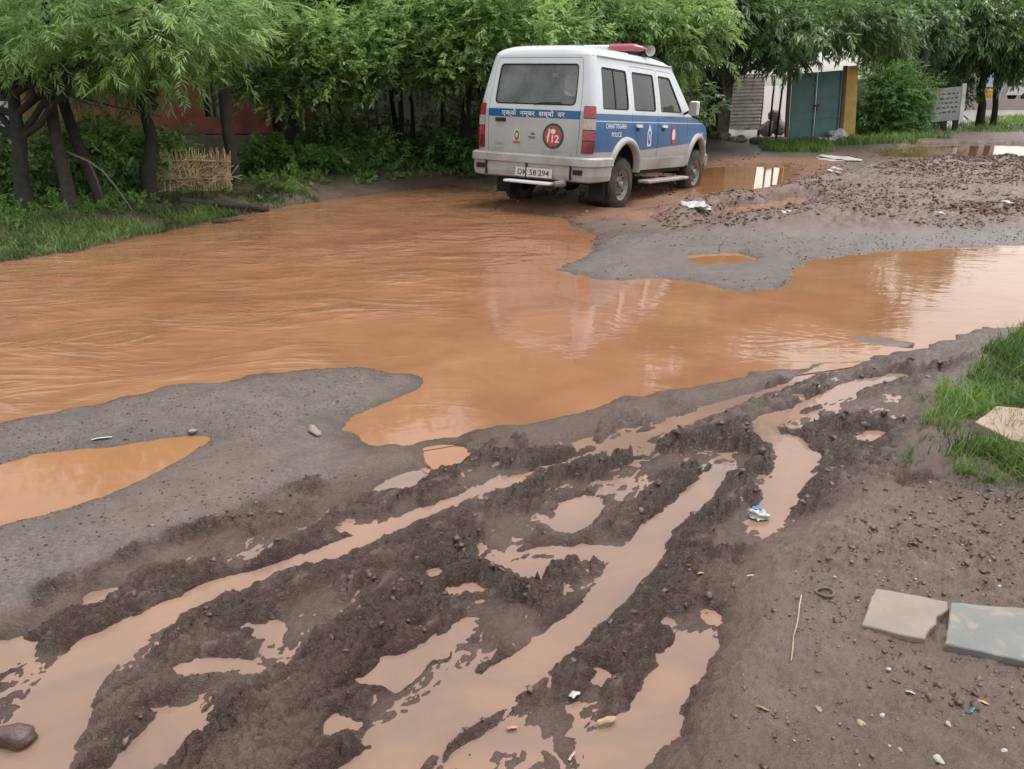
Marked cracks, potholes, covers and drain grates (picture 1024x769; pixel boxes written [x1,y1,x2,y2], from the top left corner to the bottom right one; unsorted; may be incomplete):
pothole [655,160,828,195]
pothole [0,412,249,541]
pothole [404,438,487,475]
pothole [0,180,1024,461]
